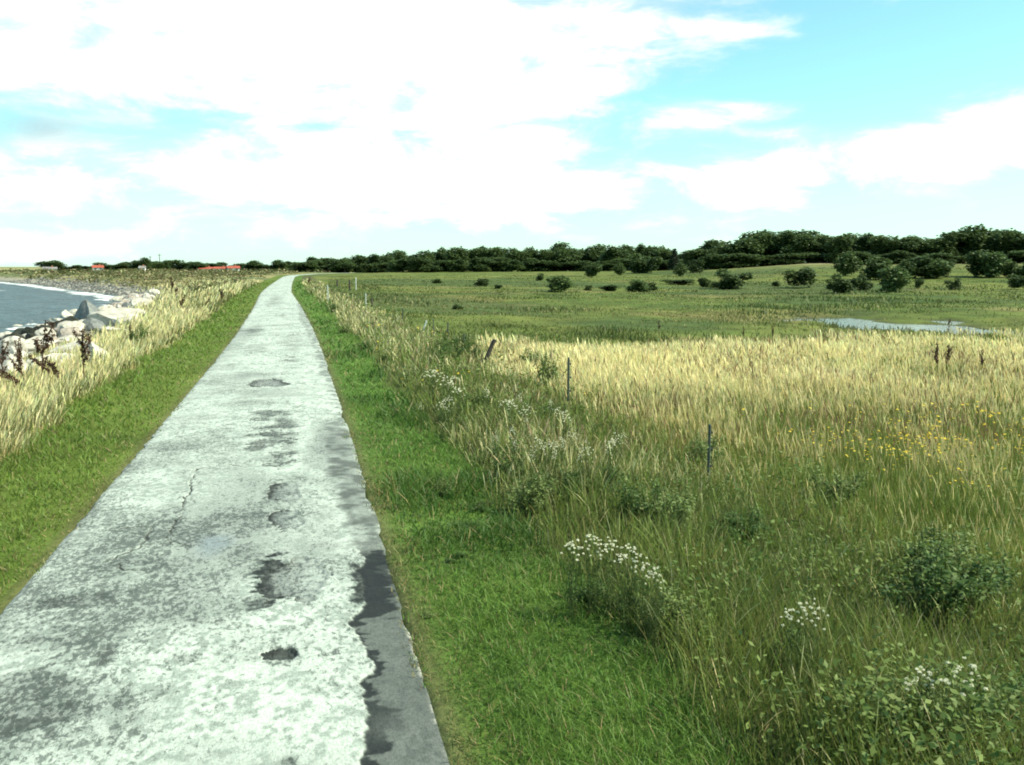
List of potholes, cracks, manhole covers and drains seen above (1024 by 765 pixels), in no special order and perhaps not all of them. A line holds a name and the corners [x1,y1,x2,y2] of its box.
crack [111,465,237,571]
pothole [267,479,302,502]
pothole [248,378,291,387]
pothole [268,509,305,532]
pothole [261,648,298,661]
pothole [258,557,331,604]
